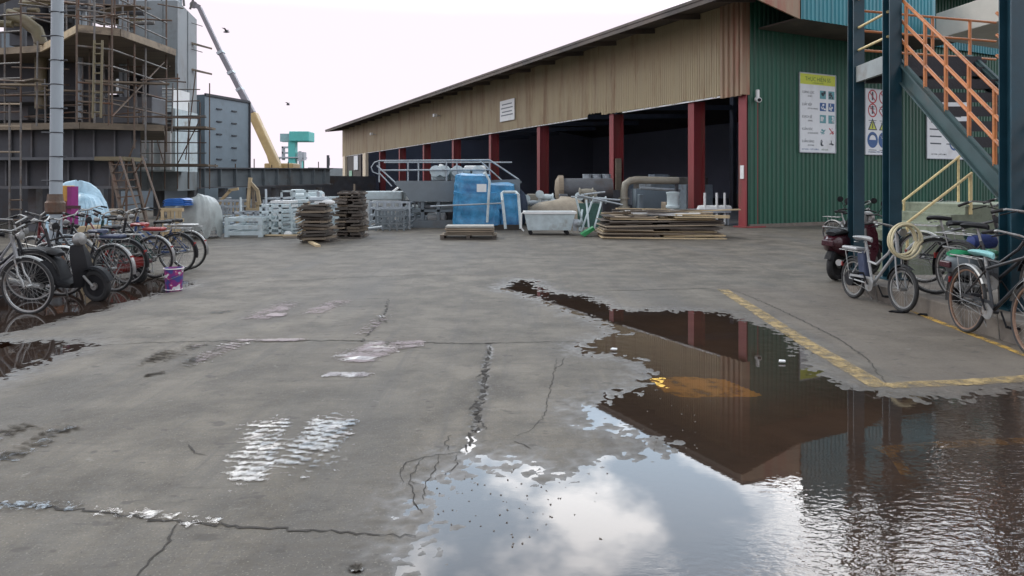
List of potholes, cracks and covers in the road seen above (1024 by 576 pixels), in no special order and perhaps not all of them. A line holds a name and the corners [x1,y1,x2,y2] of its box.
crack [515,358,564,448]
crack [400,435,467,512]
crack [136,524,177,576]
